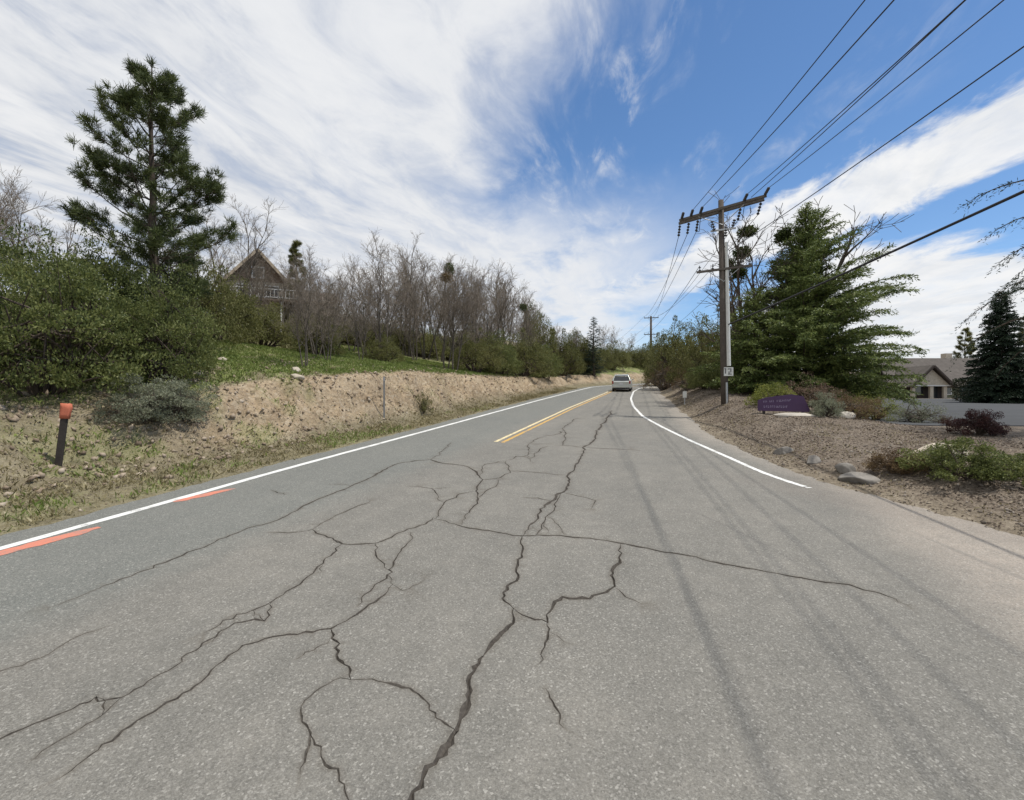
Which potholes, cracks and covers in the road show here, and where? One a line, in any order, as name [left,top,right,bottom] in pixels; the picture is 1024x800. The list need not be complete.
crack [0,411,907,800]
